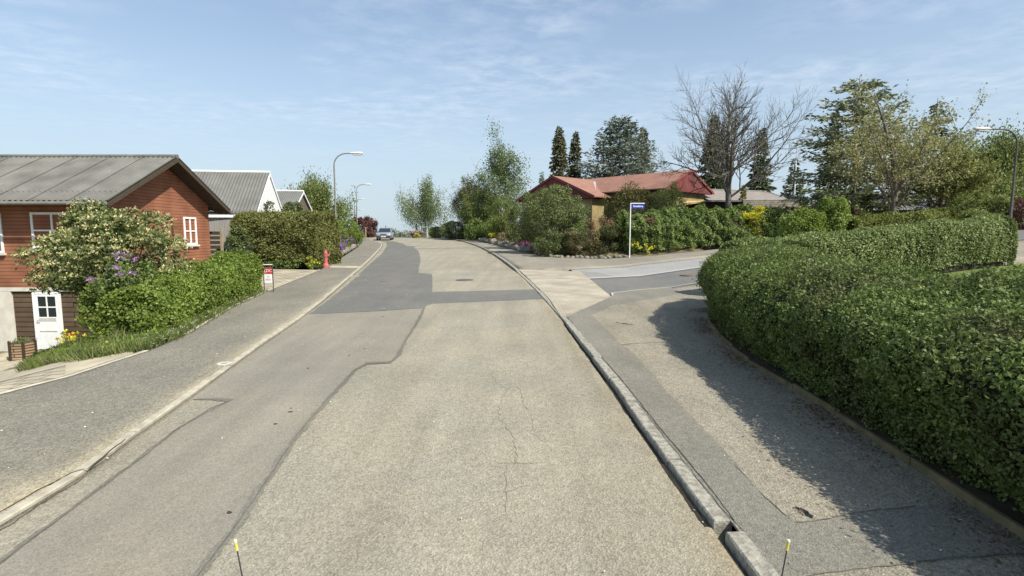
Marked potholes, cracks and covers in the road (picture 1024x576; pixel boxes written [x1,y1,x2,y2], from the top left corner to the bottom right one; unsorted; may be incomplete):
crack [494,378,544,511]
pothole [792,506,813,519]
